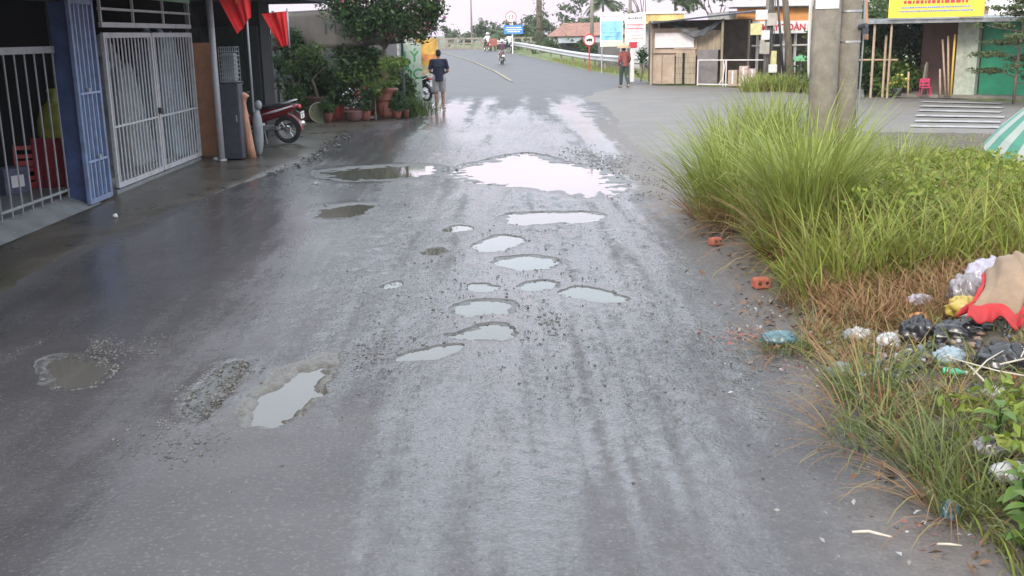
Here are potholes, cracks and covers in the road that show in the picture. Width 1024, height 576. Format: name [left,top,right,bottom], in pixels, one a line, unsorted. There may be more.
pothole [394,343,465,361]
pothole [420,247,449,255]
pothole [466,282,501,292]
pothole [33,353,120,391]
pothole [516,279,560,291]
pothole [441,224,475,232]
pothole [447,152,632,199]
pothole [494,210,608,226]
pothole [469,234,527,252]
pothole [232,353,341,429]
pothole [307,163,451,182]
pothole [181,360,249,423]
